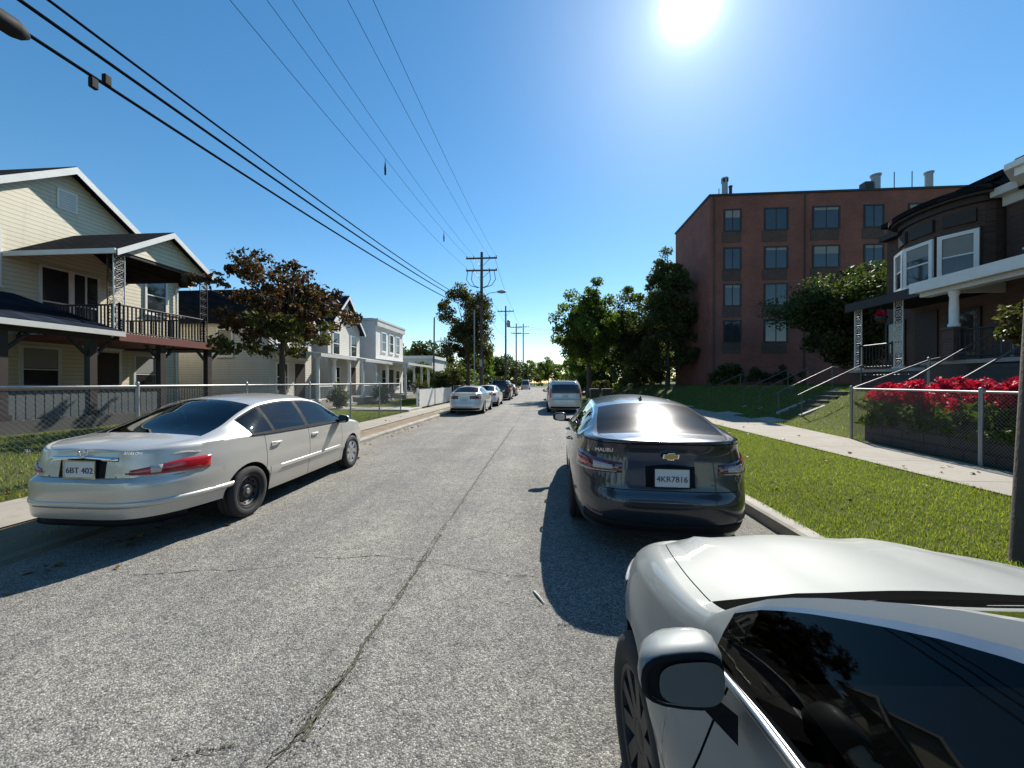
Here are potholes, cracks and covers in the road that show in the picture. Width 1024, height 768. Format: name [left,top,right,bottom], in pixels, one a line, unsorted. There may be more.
crack [315,555,536,577]
